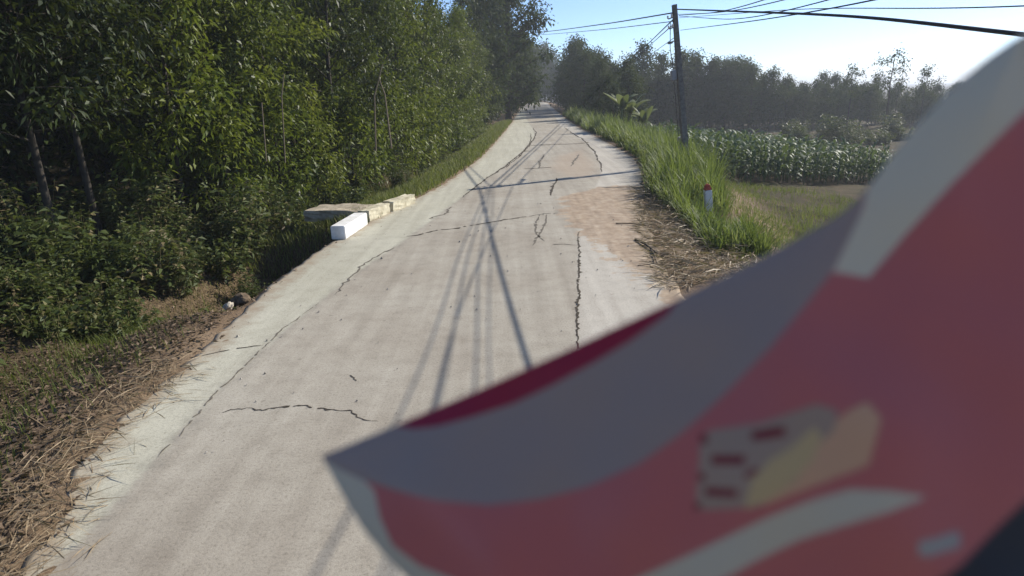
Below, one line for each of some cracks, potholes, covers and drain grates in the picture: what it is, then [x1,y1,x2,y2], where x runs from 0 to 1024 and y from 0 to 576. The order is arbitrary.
crack [569,232,581,345]
crack [159,304,377,455]
crack [412,128,580,245]
